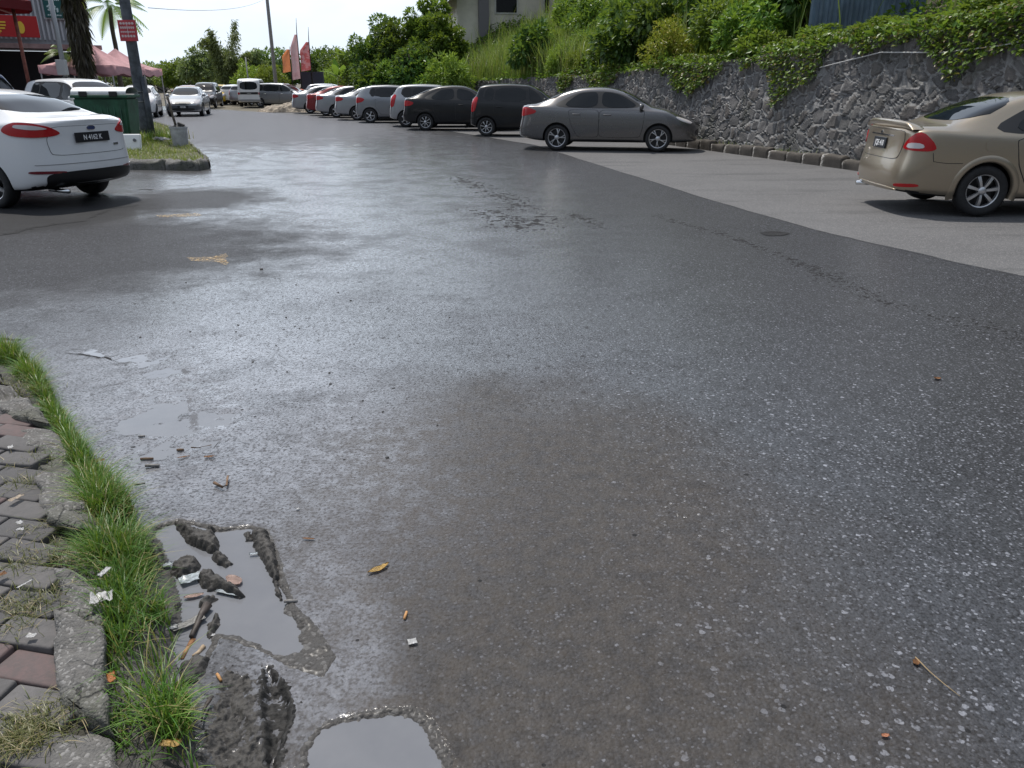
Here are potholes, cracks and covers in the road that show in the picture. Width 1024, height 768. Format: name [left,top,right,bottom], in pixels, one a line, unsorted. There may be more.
crack [651,214,1024,344]
pothole [299,705,454,768]
pothole [148,518,336,677]
crack [448,176,606,236]
